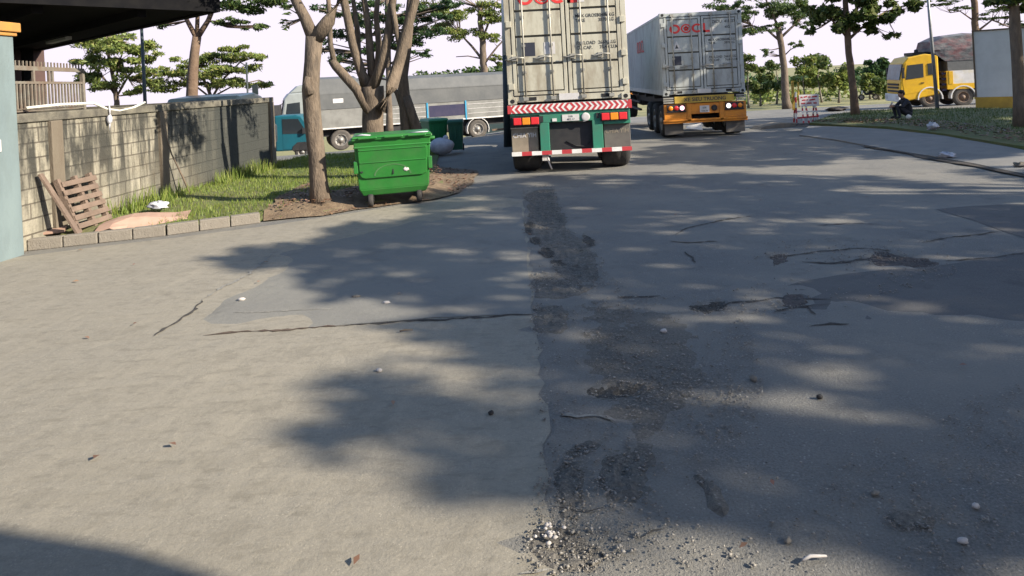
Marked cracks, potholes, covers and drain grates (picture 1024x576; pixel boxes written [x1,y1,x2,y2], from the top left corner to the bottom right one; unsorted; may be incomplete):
pothole [587,386,640,399]
crack [767,248,888,264]
crack [674,216,747,263]
pothole [598,451,649,501]
crack [729,293,847,326]
pothole [693,475,729,517]
crack [154,254,533,336]
pothole [566,440,601,459]
